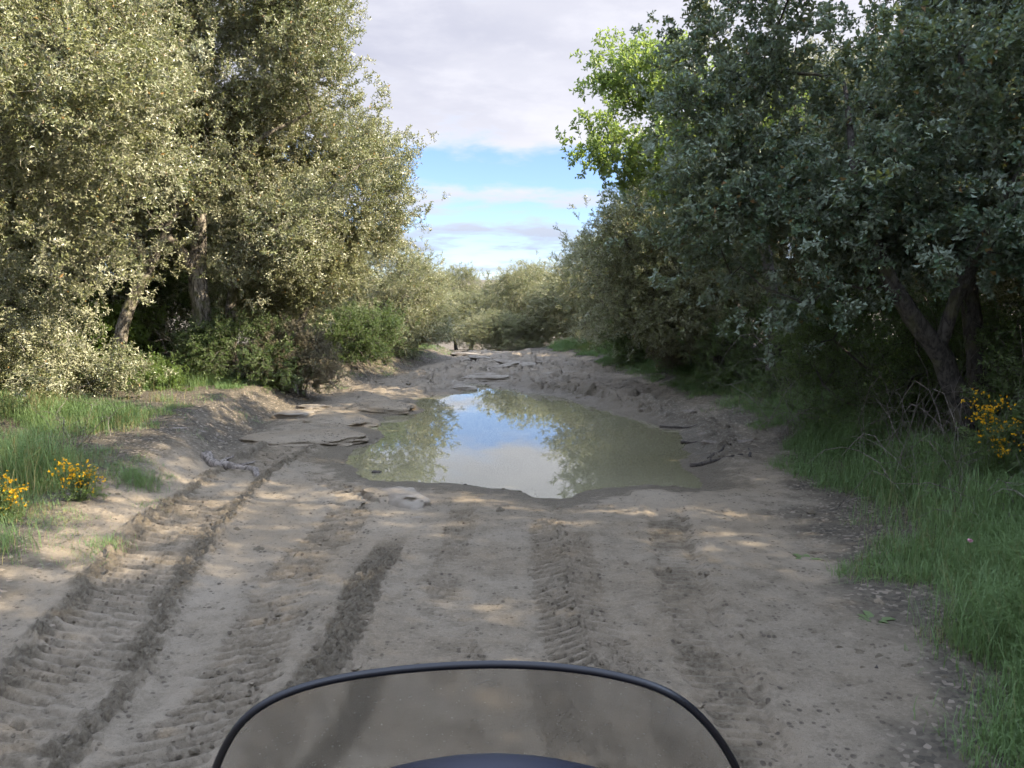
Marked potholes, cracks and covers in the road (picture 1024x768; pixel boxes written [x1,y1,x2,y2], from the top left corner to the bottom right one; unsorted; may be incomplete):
pothole [325,381,733,504]
